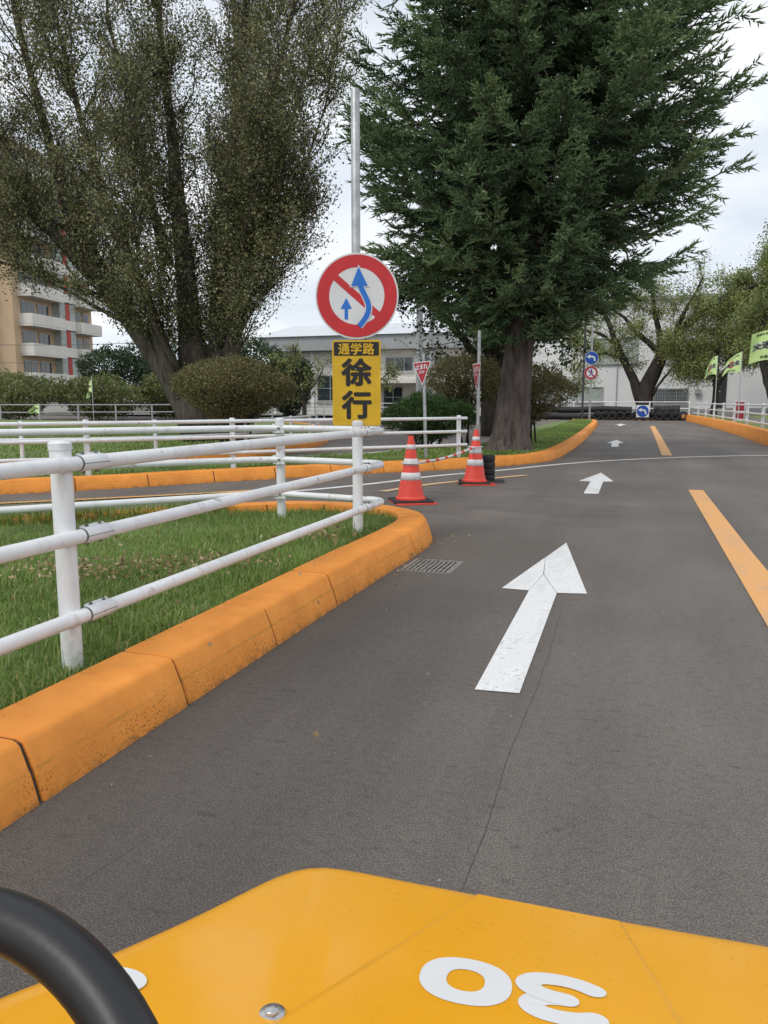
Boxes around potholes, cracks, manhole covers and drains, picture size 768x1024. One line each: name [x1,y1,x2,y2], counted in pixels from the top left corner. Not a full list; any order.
drain grate [399,558,463,574]
